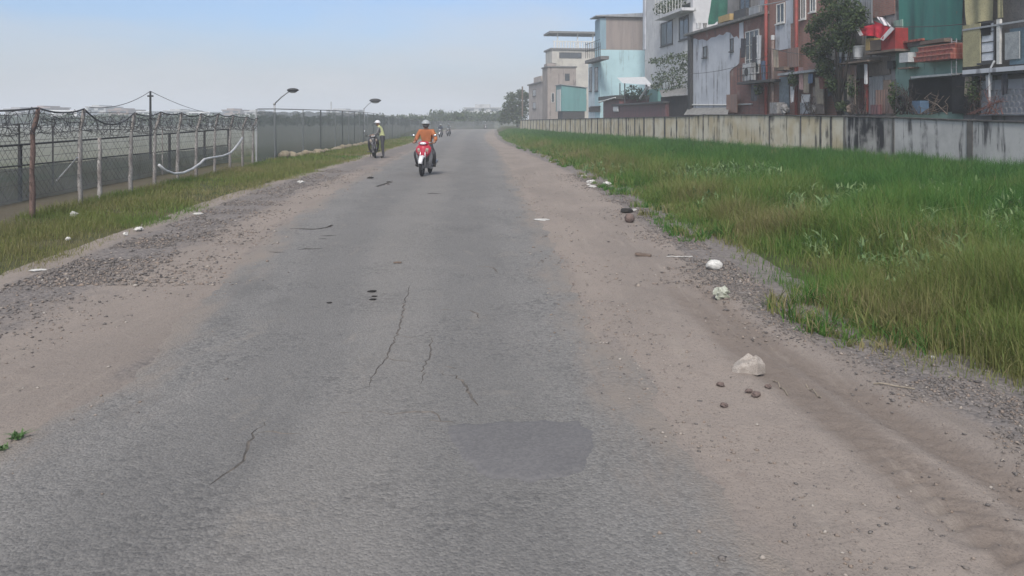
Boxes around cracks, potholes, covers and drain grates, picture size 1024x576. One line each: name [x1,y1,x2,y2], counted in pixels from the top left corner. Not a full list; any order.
crack [358,286,479,423]
crack [210,422,298,485]
